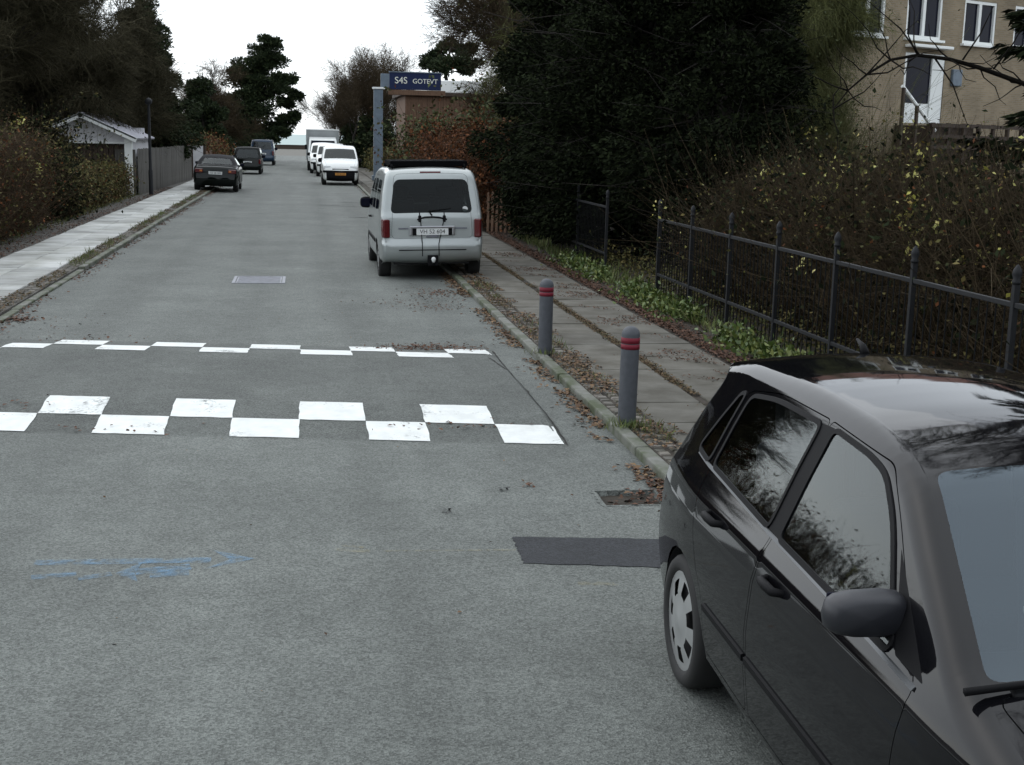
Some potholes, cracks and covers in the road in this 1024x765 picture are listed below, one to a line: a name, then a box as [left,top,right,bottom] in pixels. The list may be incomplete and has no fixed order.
manhole cover [232,276,286,284]
drain grate [590,489,663,507]
